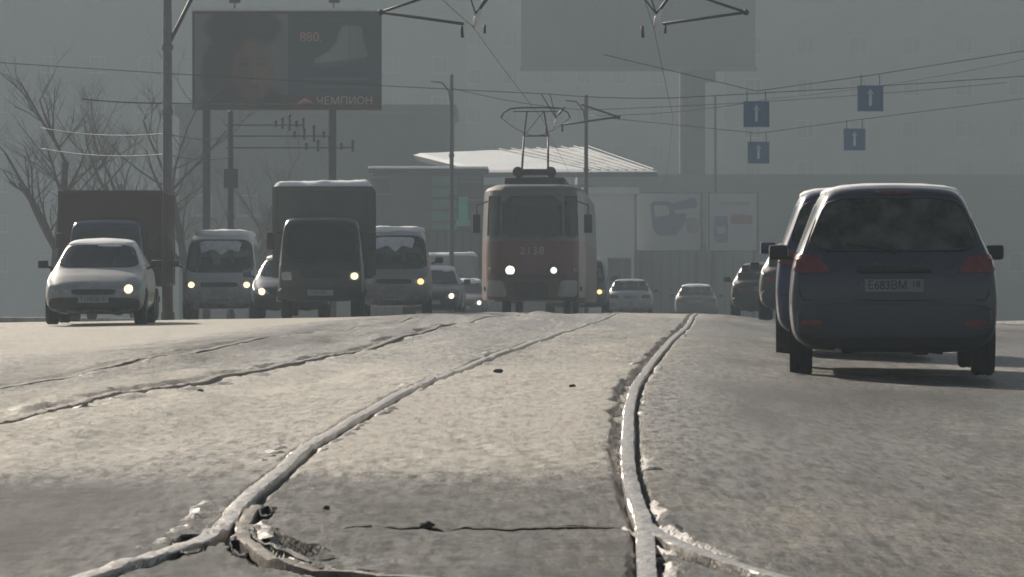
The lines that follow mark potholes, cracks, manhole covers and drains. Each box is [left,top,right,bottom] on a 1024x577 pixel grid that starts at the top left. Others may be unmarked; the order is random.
pothole [258,506,275,522]
pothole [230,540,248,560]
pothole [249,524,336,562]
